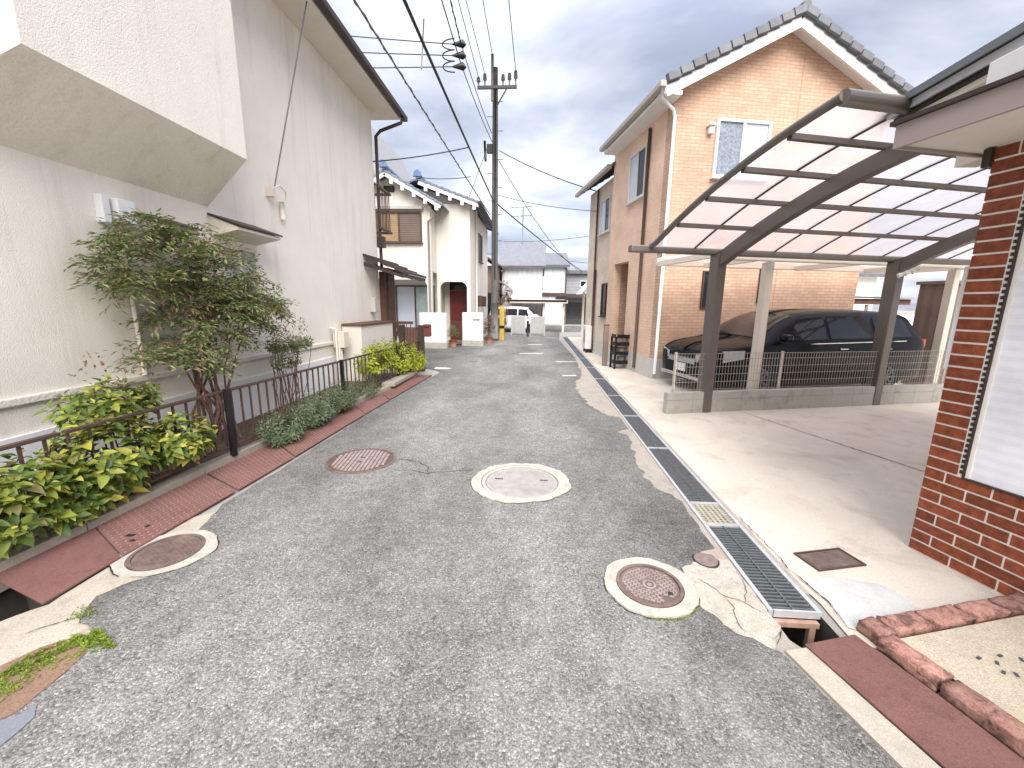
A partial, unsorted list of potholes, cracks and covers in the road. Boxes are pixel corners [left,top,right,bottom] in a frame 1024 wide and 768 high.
manhole cover [109,530,220,578]
manhole cover [793,547,867,572]
manhole cover [603,557,700,619]
manhole cover [325,448,396,474]
crack [699,579,765,633]
utility cover [692,553,720,568]
drain grate [703,524,822,620]
manhole cover [470,463,572,504]
